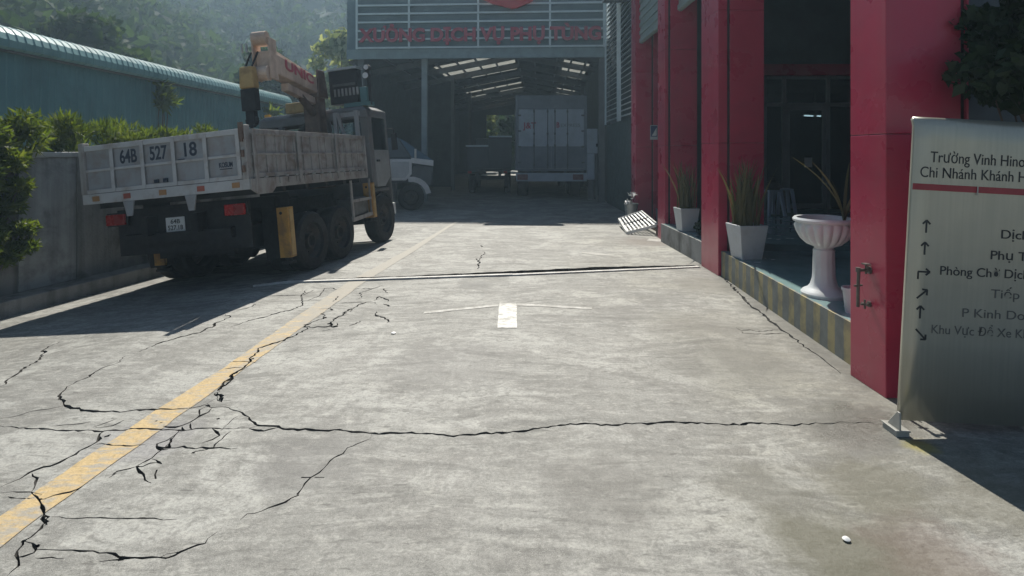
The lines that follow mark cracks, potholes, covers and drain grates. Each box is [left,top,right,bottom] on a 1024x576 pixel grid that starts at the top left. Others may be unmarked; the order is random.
drain grate [618,211,658,235]
crack [0,286,871,576]
